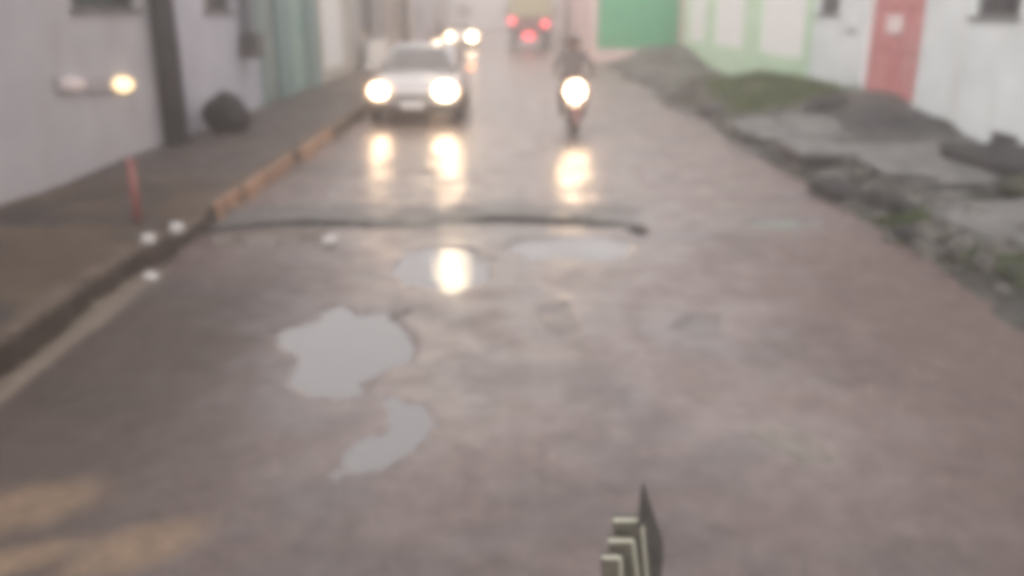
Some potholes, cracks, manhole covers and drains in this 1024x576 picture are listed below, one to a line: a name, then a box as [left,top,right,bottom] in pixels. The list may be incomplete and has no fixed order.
pothole [386,245,502,293]
pothole [324,395,442,481]
pothole [496,235,641,262]
pothole [265,302,422,400]
